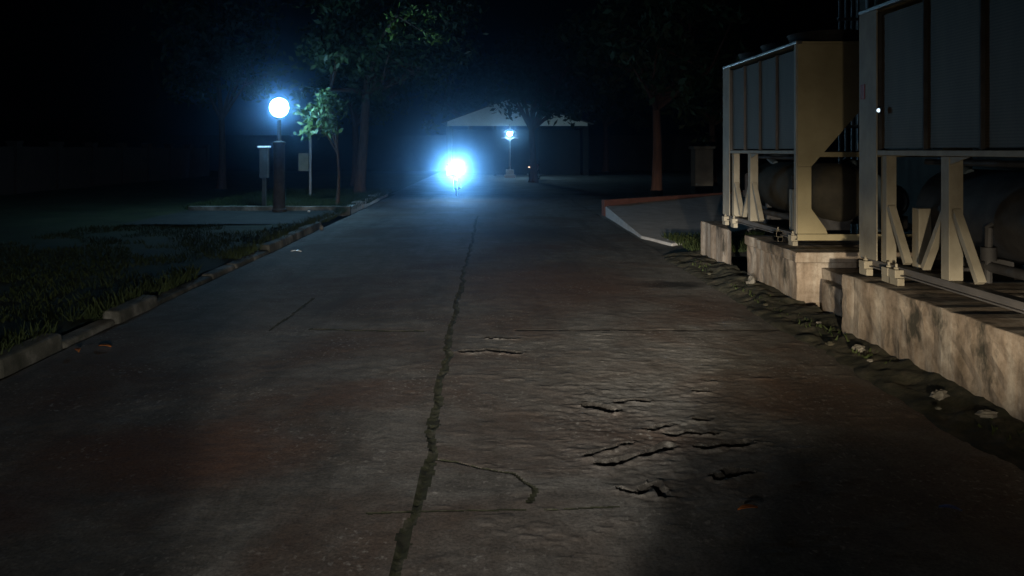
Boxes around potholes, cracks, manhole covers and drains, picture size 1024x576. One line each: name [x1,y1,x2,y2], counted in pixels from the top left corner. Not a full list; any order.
crack [269,216,620,576]
